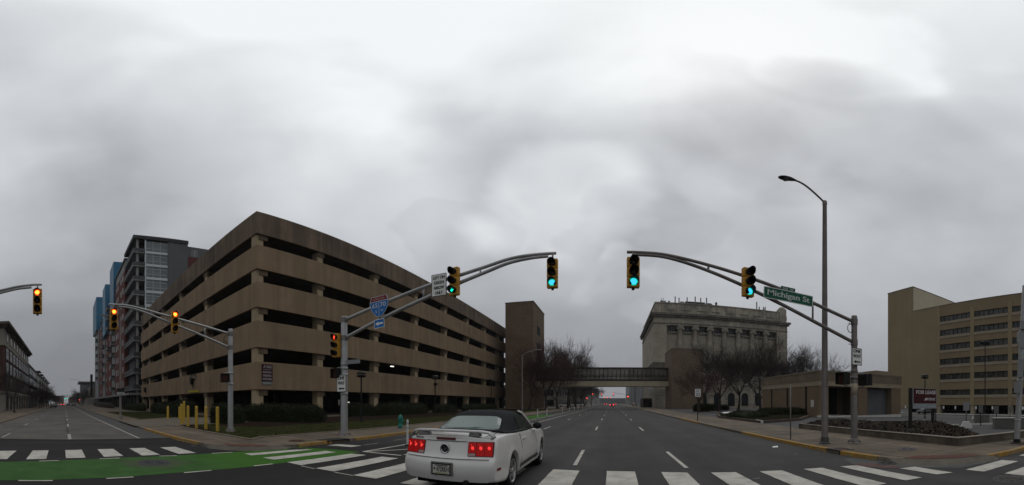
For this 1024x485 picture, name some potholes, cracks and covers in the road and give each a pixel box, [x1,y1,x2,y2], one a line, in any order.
manhole cover [992,475,1024,483]
